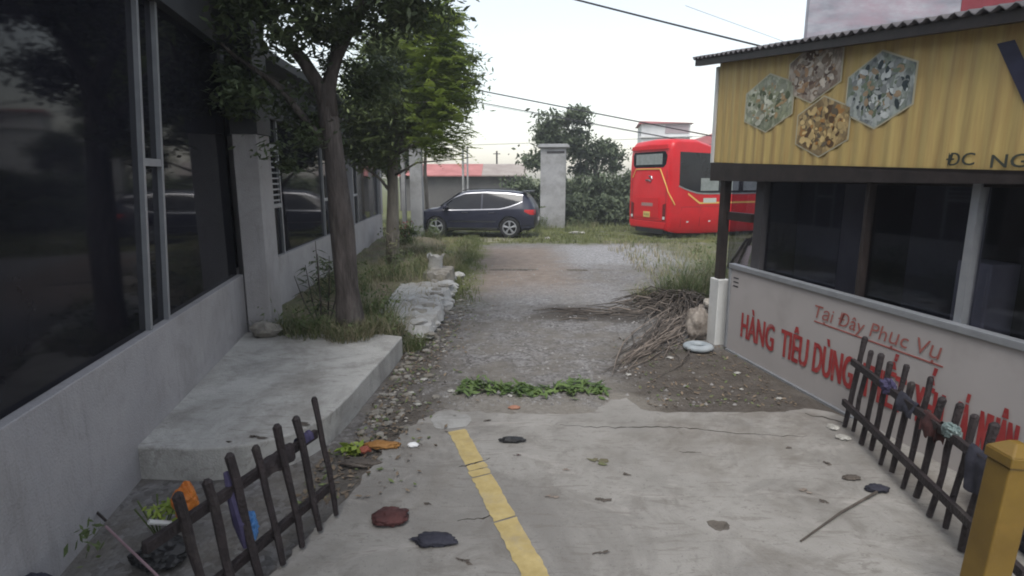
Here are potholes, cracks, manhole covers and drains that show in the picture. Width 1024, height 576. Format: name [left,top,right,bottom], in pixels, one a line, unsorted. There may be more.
crack [560,424,805,437]
